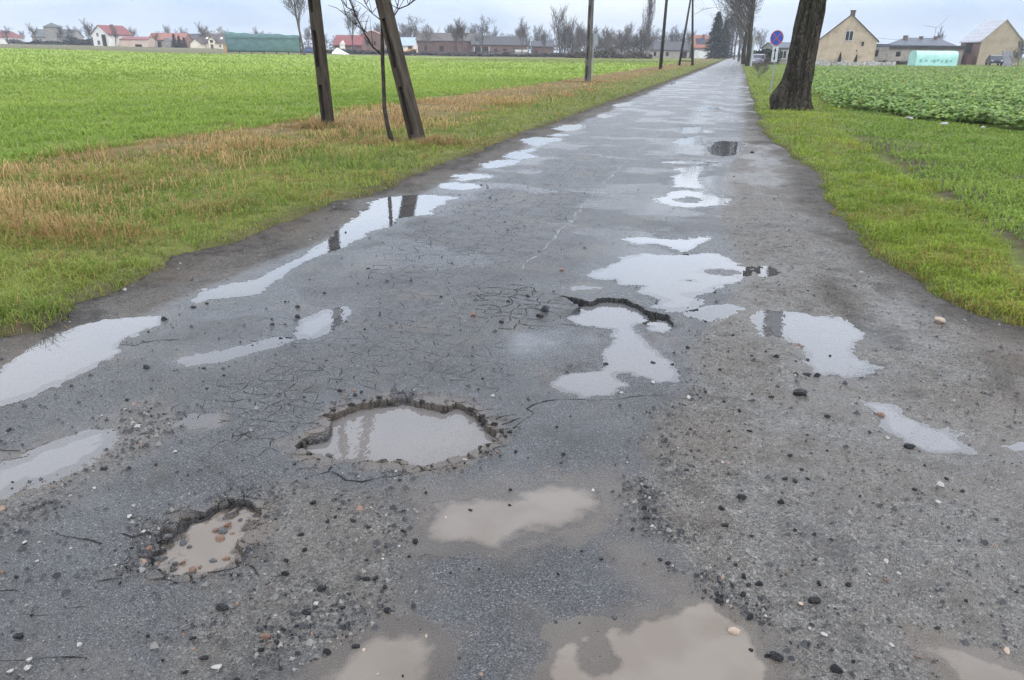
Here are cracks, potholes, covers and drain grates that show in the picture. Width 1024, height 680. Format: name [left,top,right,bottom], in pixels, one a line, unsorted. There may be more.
pothole [121,487,278,589]
pothole [281,391,512,476]
crack [171,151,625,457]
crack [490,395,649,437]
